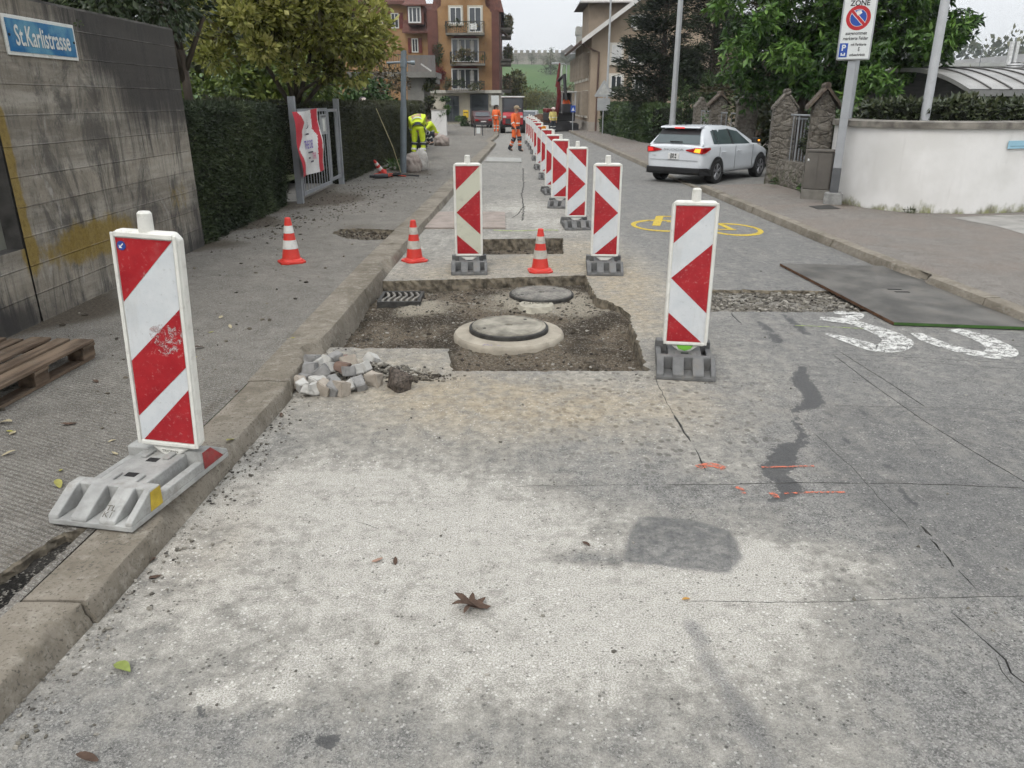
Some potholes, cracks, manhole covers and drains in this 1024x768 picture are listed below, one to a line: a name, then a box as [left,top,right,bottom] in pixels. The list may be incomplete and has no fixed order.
drain grate [377,291,425,308]
manhole cover [509,285,574,304]
pothole [333,228,394,240]
crack [693,433,1024,691]
manhole cover [454,315,564,355]
crack [514,168,525,221]
